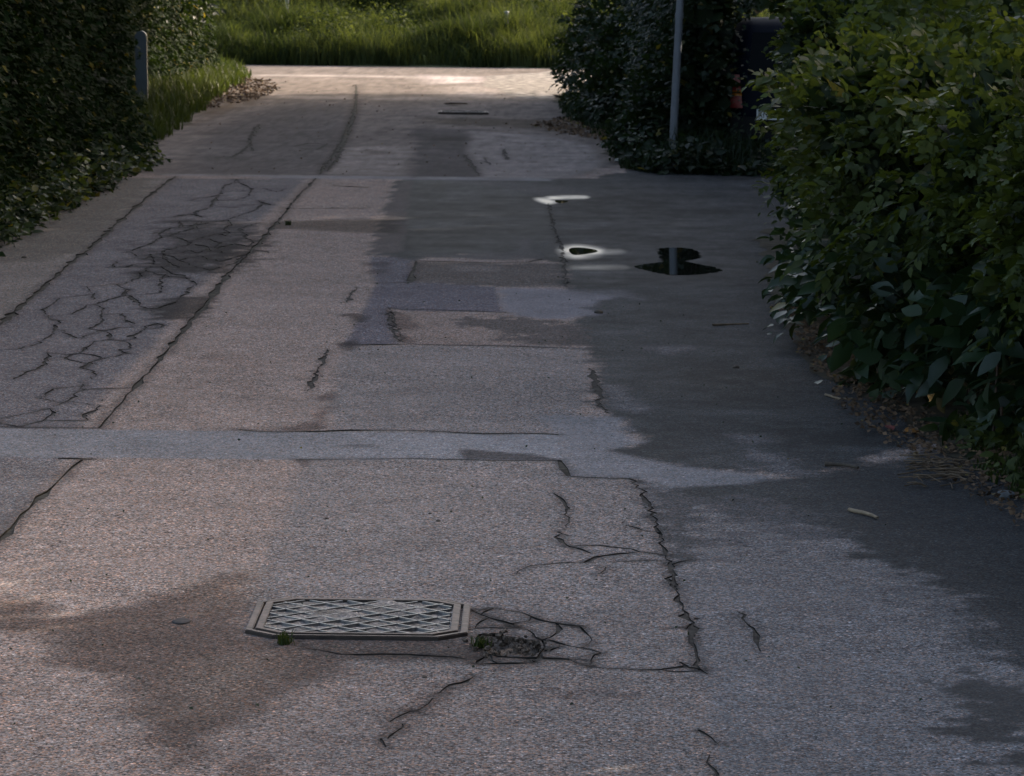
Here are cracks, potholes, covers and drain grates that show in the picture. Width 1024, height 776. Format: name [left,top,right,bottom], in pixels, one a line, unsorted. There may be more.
manhole cover [245,597,471,655]
crack [588,368,608,413]
pothole [476,633,542,656]
crack [307,608,708,747]
crack [307,350,329,391]
crack [737,611,761,652]
crack [0,179,283,427]
